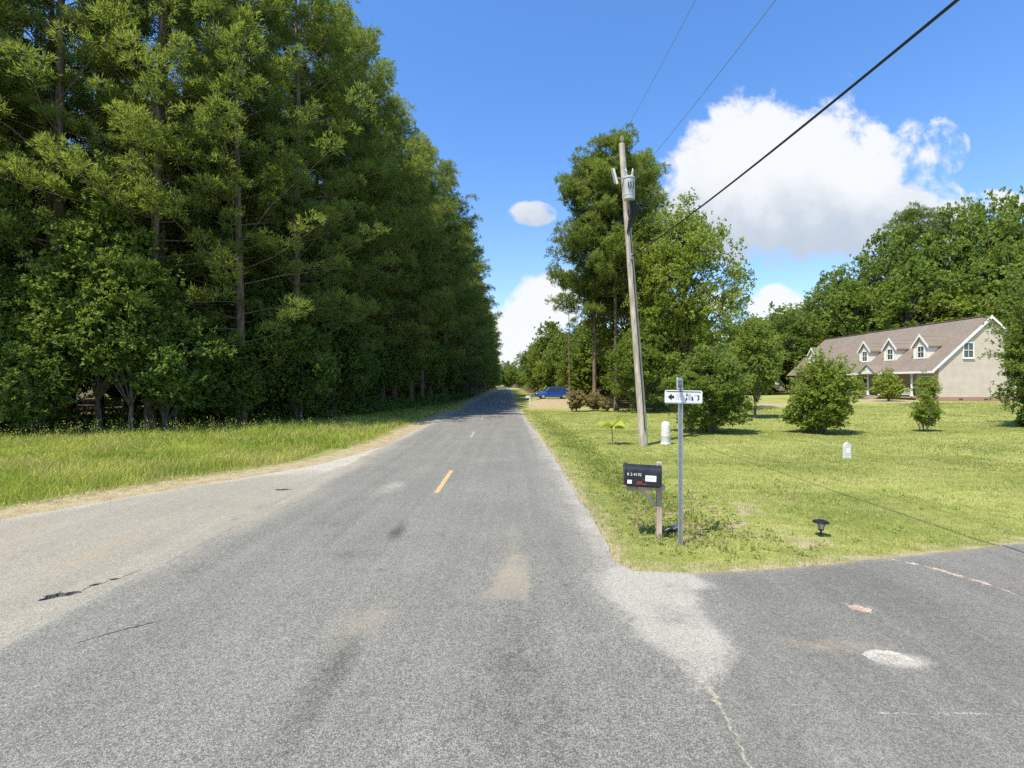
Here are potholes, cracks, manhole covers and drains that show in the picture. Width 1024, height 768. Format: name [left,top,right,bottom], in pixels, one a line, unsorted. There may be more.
crack [74,620,161,644]
crack [704,686,753,768]
